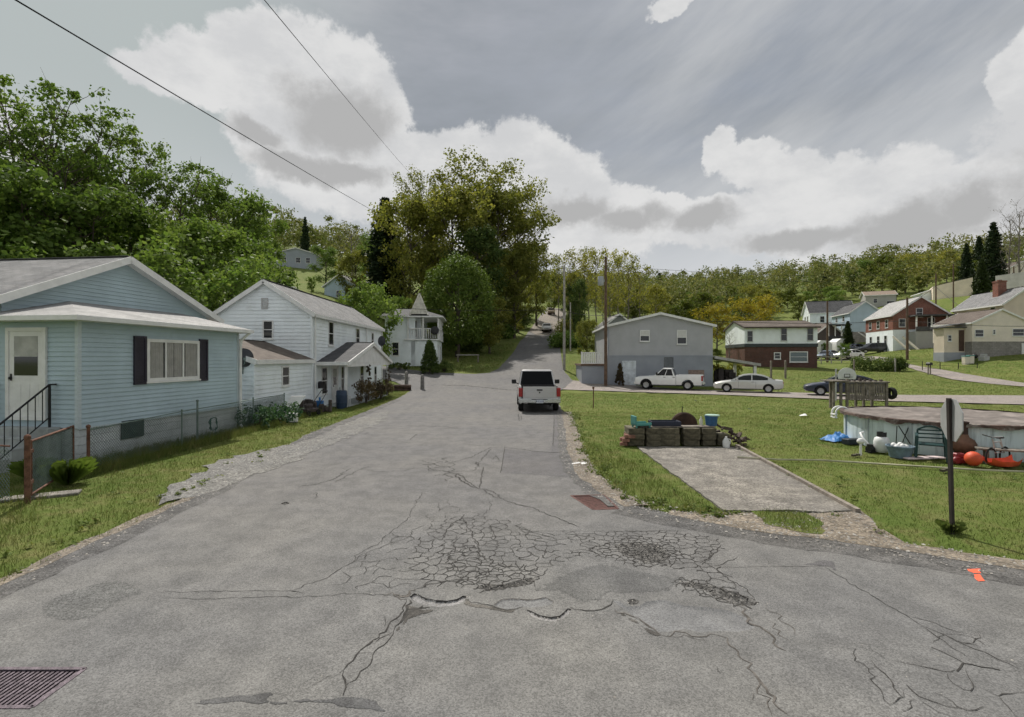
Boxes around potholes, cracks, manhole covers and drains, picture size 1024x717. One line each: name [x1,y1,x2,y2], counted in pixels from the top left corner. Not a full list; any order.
crack [167,446,795,715]
drain grate [0,667,87,709]
pothole [526,608,571,622]
crack [829,569,1022,715]
pothole [410,593,466,607]
